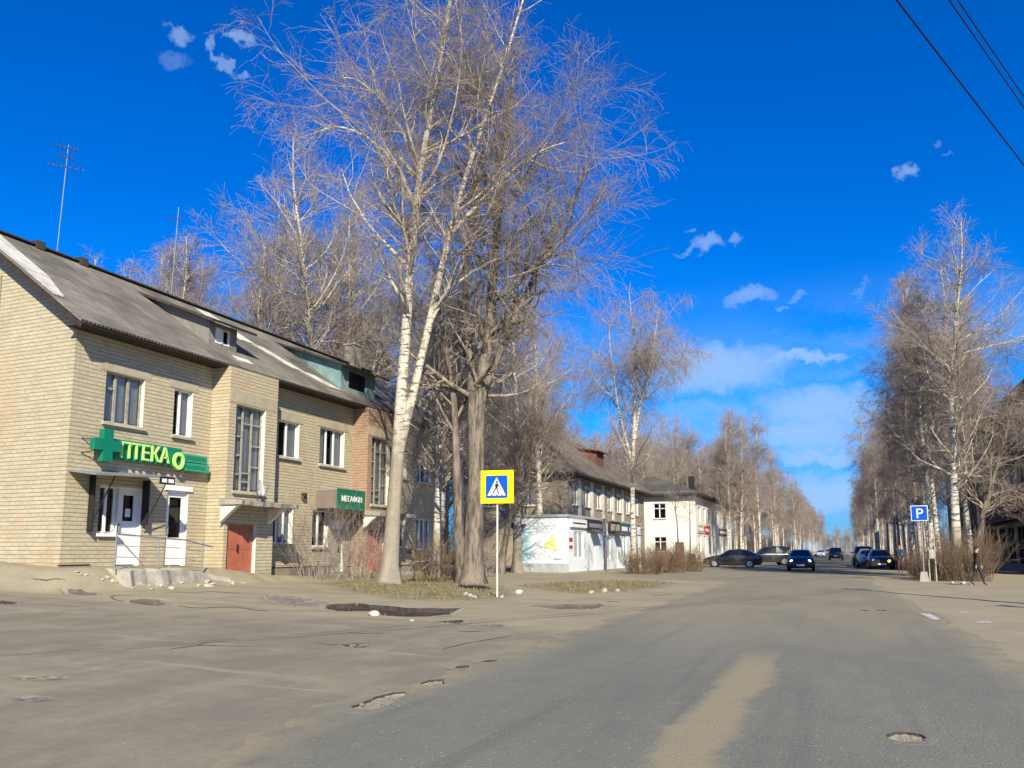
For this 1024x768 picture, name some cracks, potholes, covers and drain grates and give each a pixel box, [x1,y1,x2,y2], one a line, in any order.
pothole [874,730,938,745]
pothole [340,690,416,714]
pothole [411,678,454,688]
crack [170,641,231,649]
pothole [318,603,467,618]
